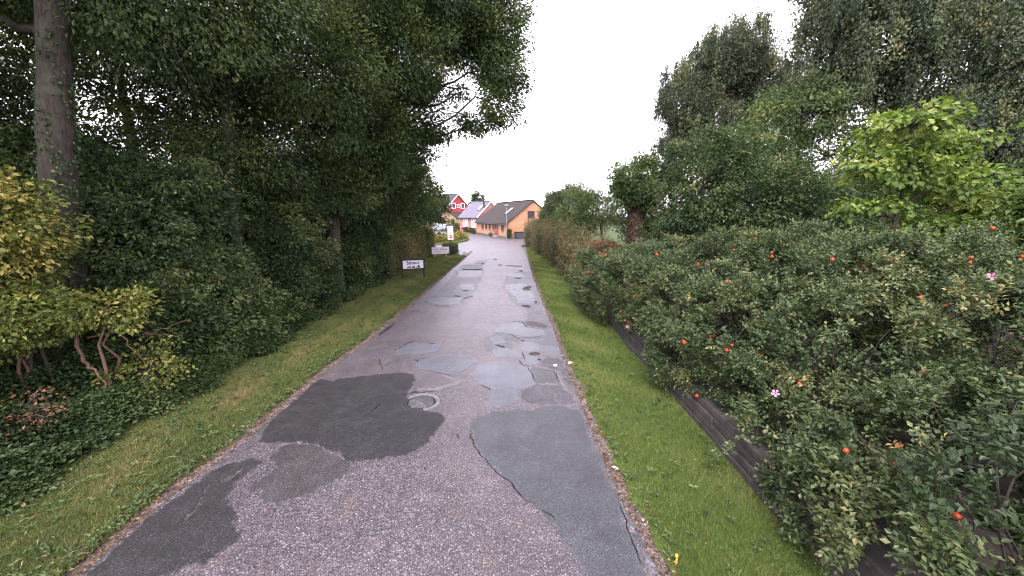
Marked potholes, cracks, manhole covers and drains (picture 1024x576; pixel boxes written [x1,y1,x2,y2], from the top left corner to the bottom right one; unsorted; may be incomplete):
manhole cover [400,393,441,412]
crack [457,433,547,514]
